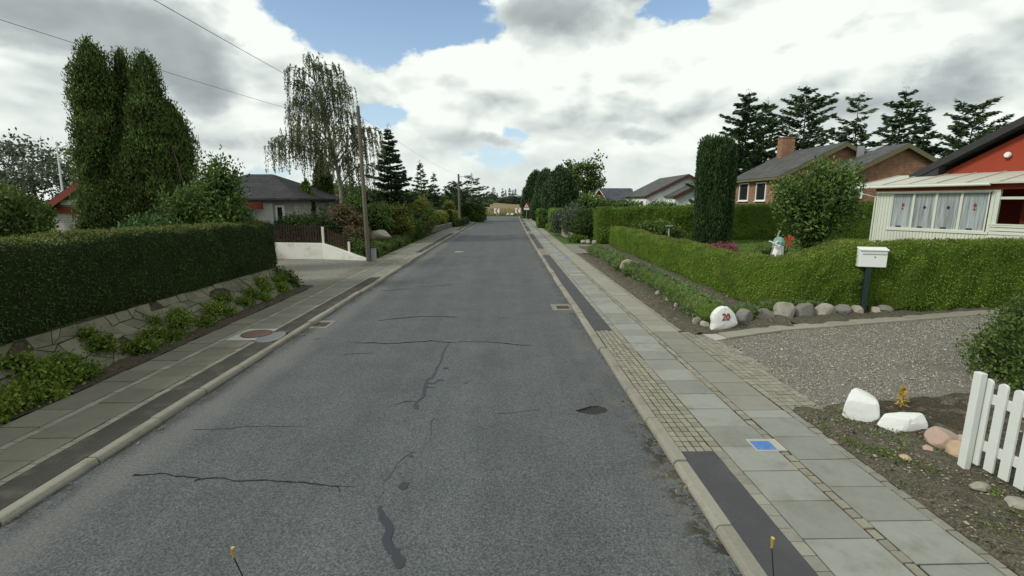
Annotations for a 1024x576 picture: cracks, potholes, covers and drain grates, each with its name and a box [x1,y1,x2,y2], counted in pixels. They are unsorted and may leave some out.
manhole cover [240,330,273,338]
pothole [575,406,607,415]
crack [344,340,531,355]
crack [376,452,413,568]
crack [132,473,354,492]
